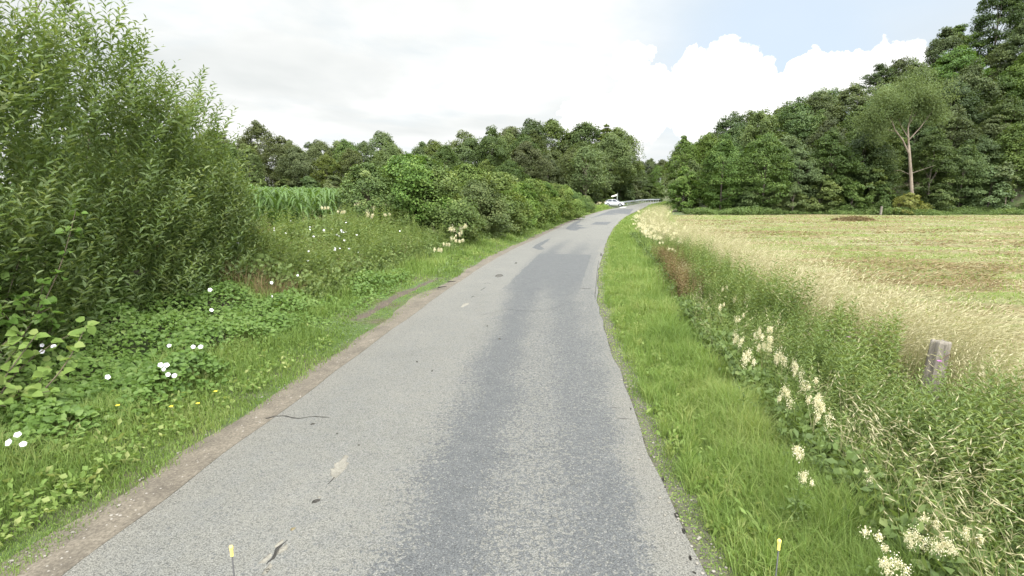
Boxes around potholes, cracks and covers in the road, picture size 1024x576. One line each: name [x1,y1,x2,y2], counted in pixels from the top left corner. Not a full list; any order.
crack [252,540,288,575]
